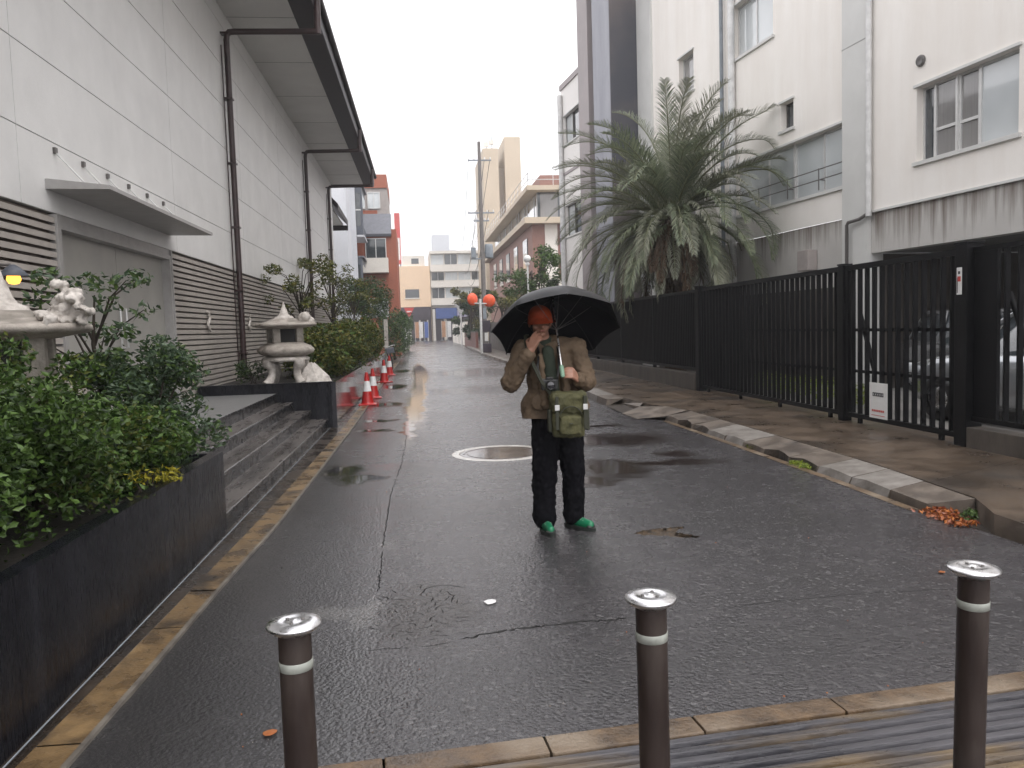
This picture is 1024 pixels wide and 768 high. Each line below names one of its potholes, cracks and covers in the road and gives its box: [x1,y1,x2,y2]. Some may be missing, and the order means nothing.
manhole cover [452,445,533,461]
crack [366,585,957,651]
pothole [633,527,700,538]
